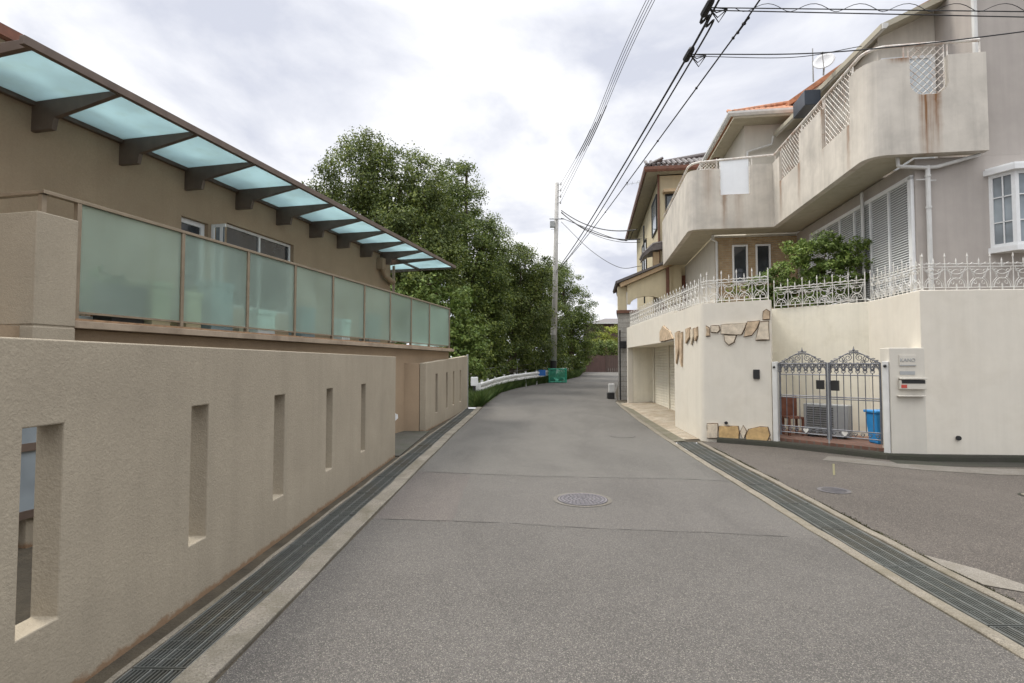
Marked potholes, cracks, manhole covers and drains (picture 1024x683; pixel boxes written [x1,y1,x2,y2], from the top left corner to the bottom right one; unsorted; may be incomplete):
drain grate [747,484,808,505]
manhole cover [553,492,612,507]
drain grate [989,626,1024,647]
drain grate [133,591,271,669]
drain grate [723,470,774,485]
drain grate [378,464,411,476]
drain grate [689,449,725,460]
drain grate [822,529,928,567]
drain grate [357,476,398,493]
drain grate [677,442,708,451]
drain grate [290,514,355,545]
drain grate [704,459,746,471]
